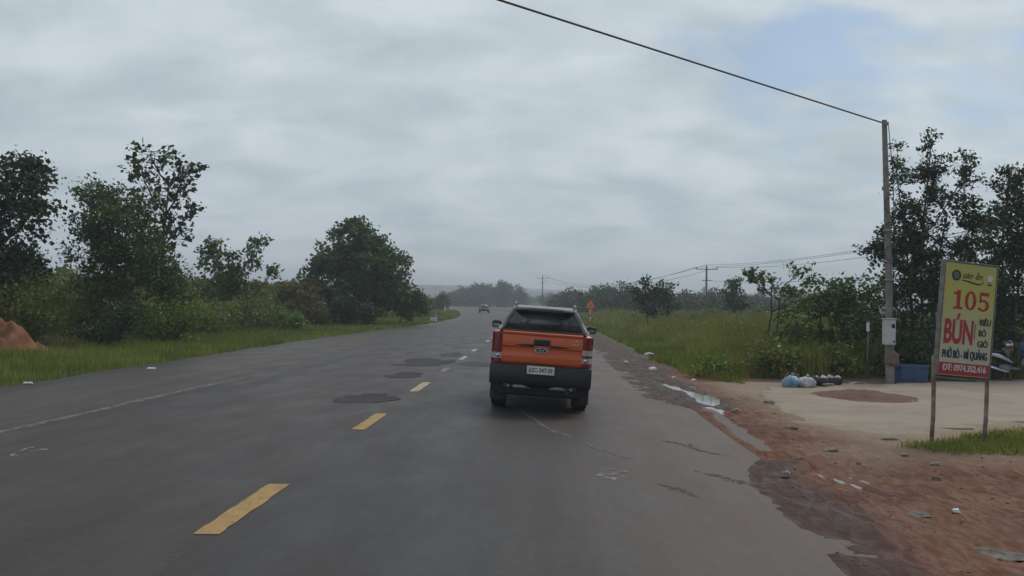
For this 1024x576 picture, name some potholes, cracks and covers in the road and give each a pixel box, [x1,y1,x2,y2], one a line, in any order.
crack [661,440,748,496]
crack [519,409,635,460]
